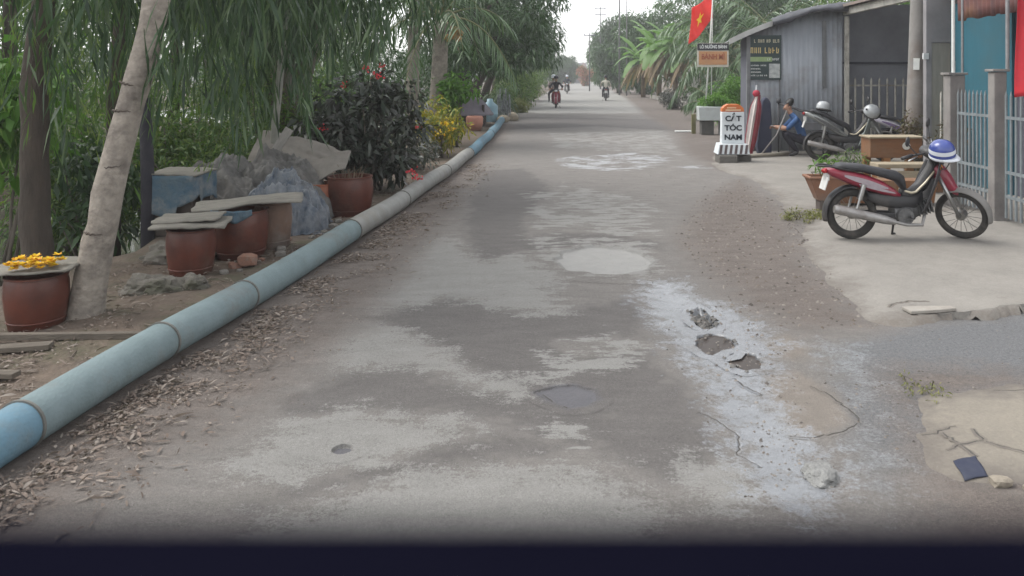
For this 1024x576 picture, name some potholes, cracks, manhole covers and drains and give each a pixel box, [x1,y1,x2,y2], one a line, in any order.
crack [696,377,764,468]
crack [921,425,1024,457]
crack [789,386,863,440]
pothole [682,329,750,362]
pothole [680,304,727,334]
crack [887,300,930,308]
